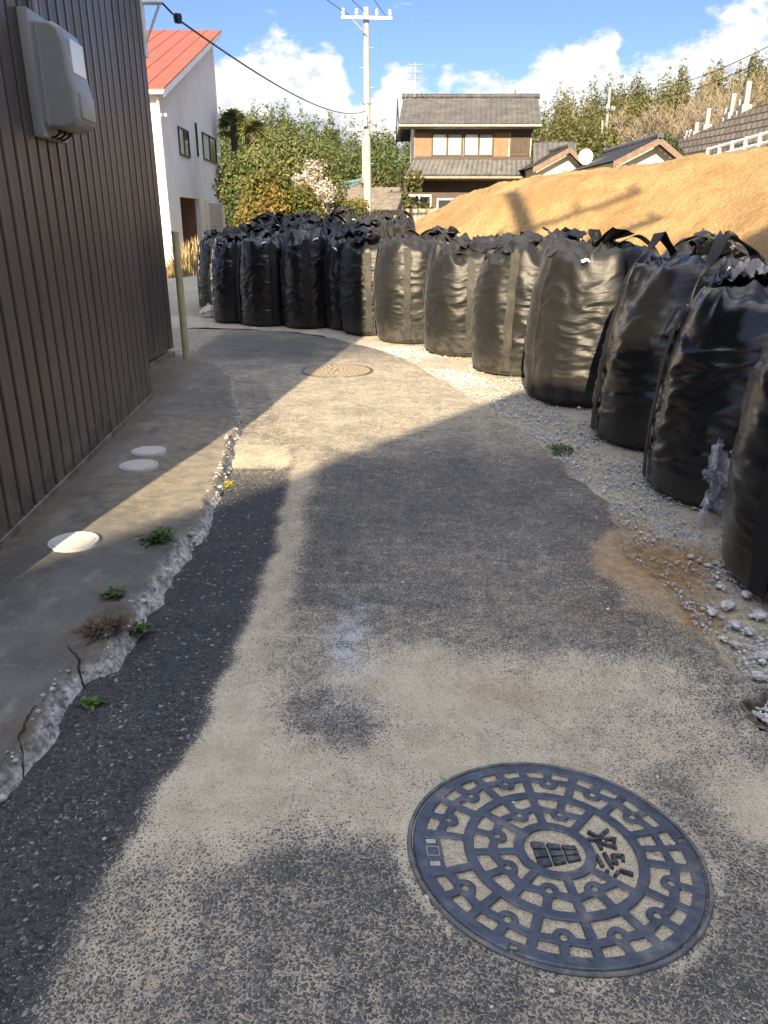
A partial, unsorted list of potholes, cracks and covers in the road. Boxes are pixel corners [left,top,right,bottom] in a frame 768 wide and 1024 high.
crack [18,645,86,778]
manhole cover [301,364,373,378]
manhole cover [407,762,714,978]
